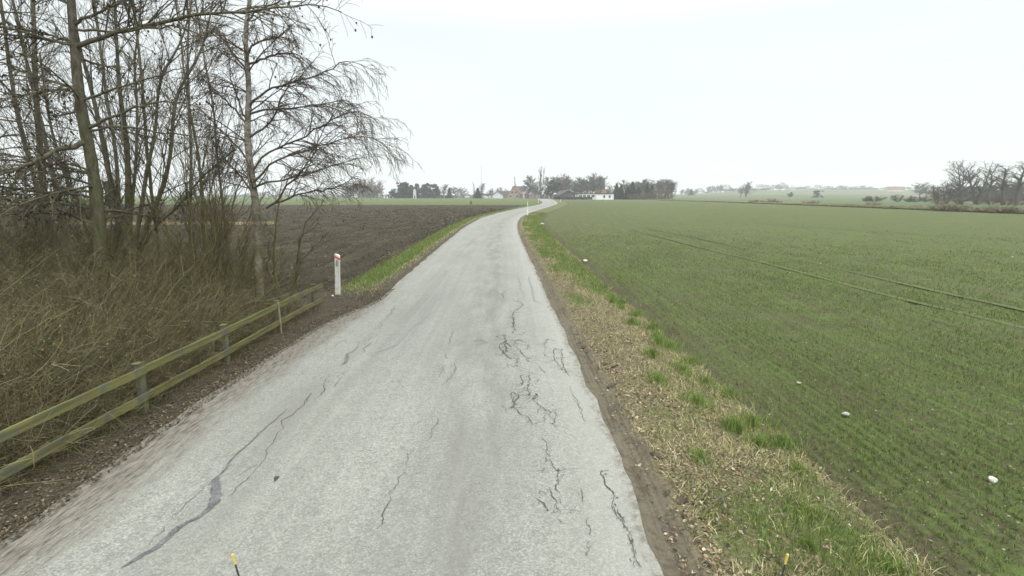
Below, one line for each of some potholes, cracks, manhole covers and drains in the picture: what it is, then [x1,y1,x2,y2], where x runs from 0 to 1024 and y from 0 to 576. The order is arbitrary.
crack [231,379,338,495]
crack [475,281,586,523]
crack [600,470,642,568]
crack [379,418,438,527]
